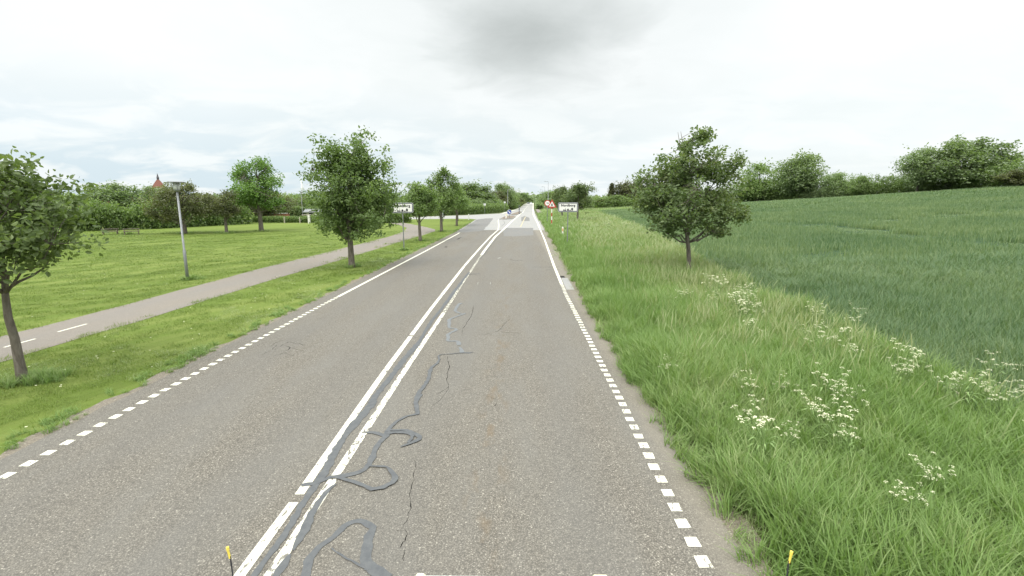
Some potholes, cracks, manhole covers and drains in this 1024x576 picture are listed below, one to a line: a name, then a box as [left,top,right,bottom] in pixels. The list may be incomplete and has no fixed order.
crack [251,241,495,576]
